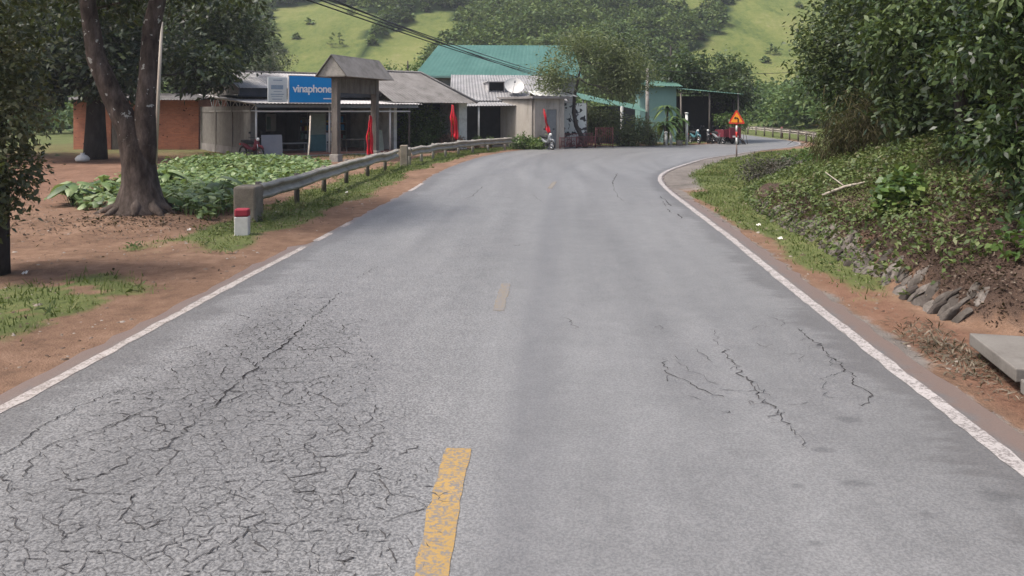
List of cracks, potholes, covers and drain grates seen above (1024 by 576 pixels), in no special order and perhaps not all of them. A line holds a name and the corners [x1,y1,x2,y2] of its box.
crack [661,328,810,446]
crack [755,315,874,406]
crack [0,290,450,576]
